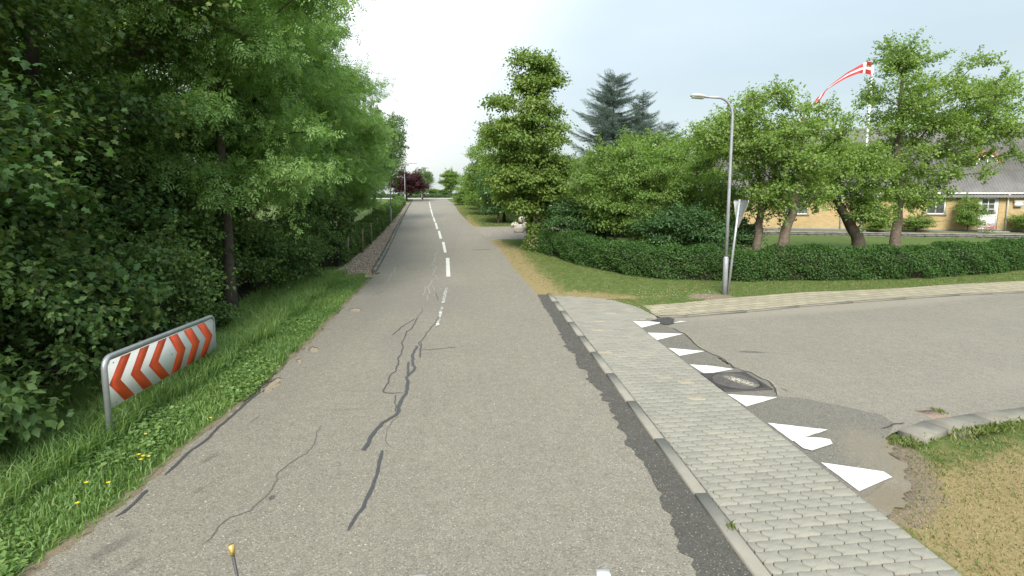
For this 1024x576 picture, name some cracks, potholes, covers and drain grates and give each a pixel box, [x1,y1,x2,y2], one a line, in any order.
manhole cover [701,372,773,392]
crack [115,392,321,546]
drain grate [915,408,952,419]
crack [417,252,449,317]
